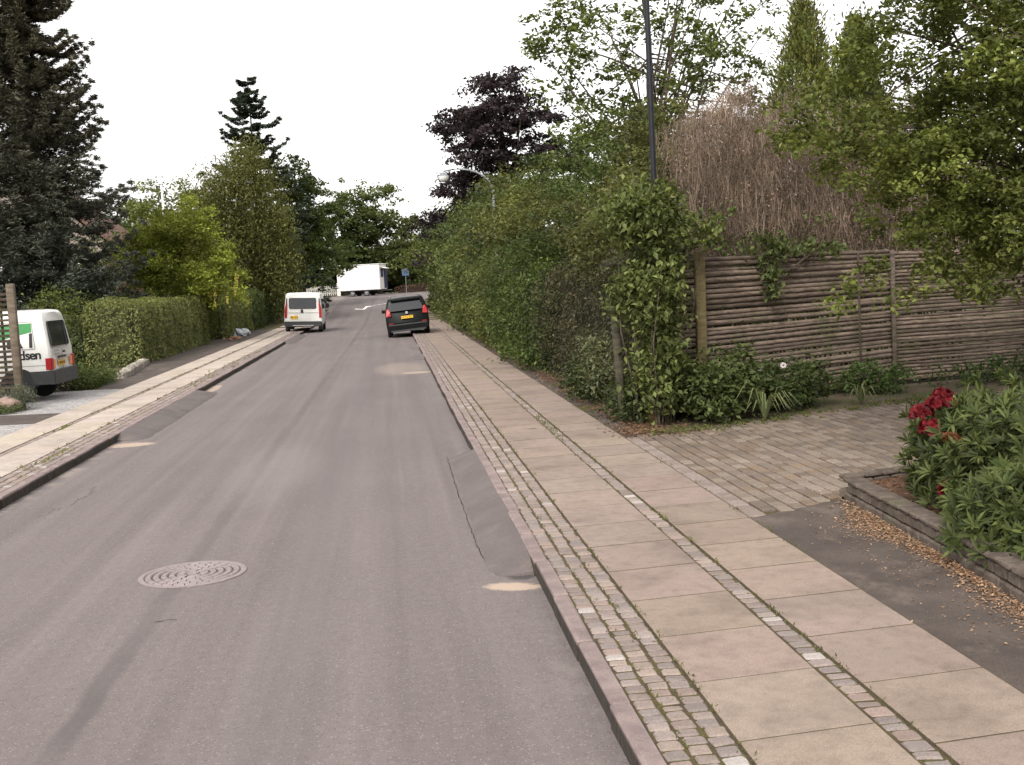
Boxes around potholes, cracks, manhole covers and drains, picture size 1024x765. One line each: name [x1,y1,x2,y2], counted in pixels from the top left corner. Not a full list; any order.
manhole cover [138,561,247,588]
